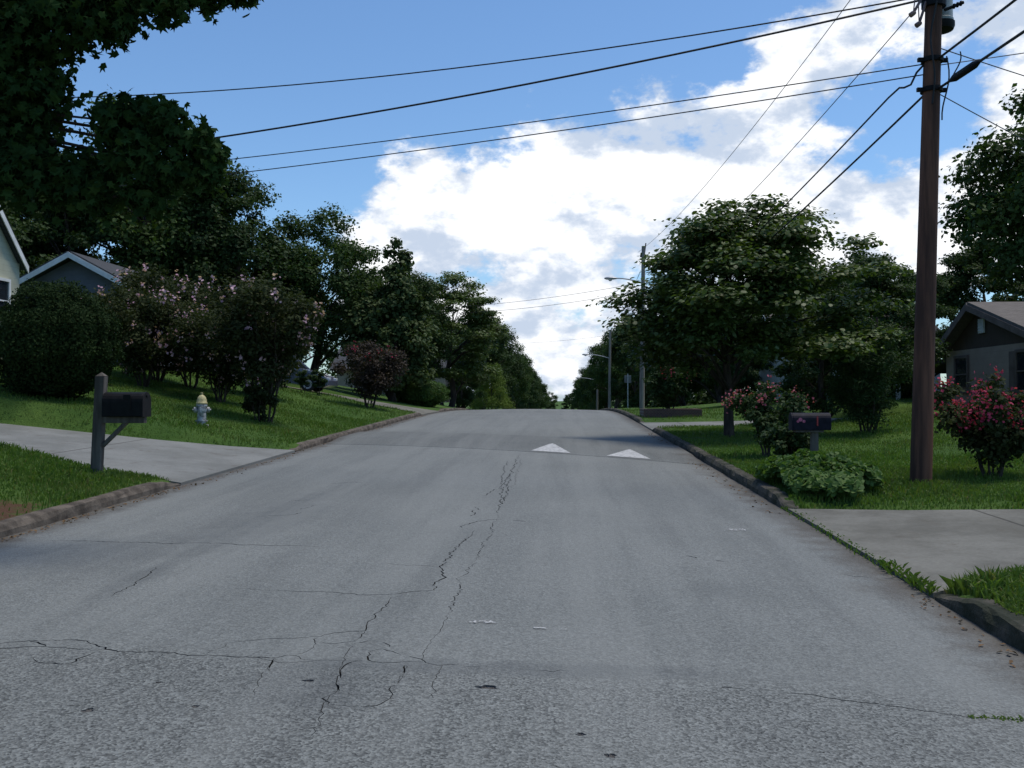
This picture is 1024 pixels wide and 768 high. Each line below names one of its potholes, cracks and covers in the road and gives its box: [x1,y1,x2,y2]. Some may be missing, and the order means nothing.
crack [0,456,525,738]
crack [722,687,1024,721]
